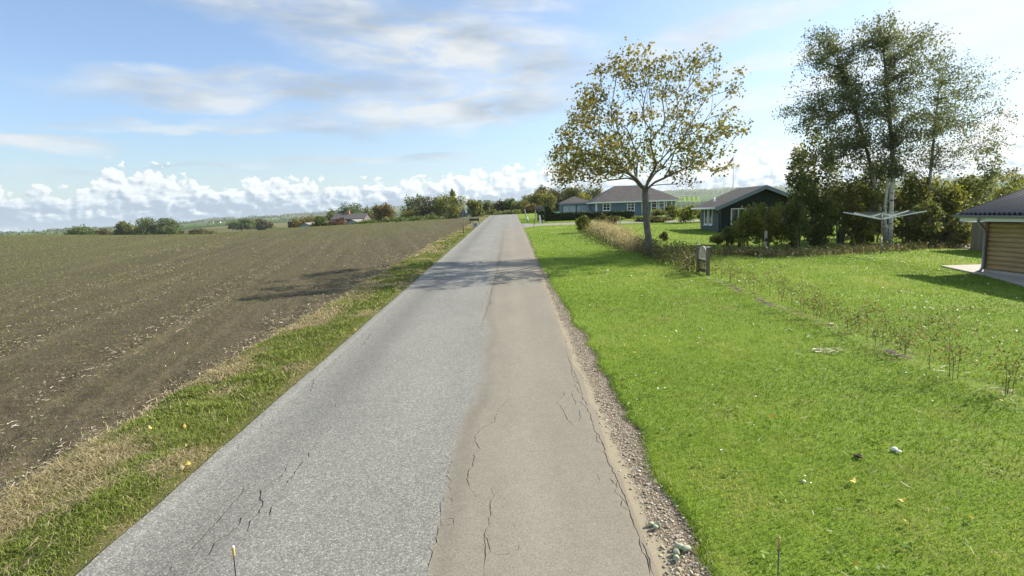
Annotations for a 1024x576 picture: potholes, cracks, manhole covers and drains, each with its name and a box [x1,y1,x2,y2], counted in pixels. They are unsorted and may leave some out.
crack [170,445,315,570]
crack [484,494,494,564]
crack [561,358,652,573]
